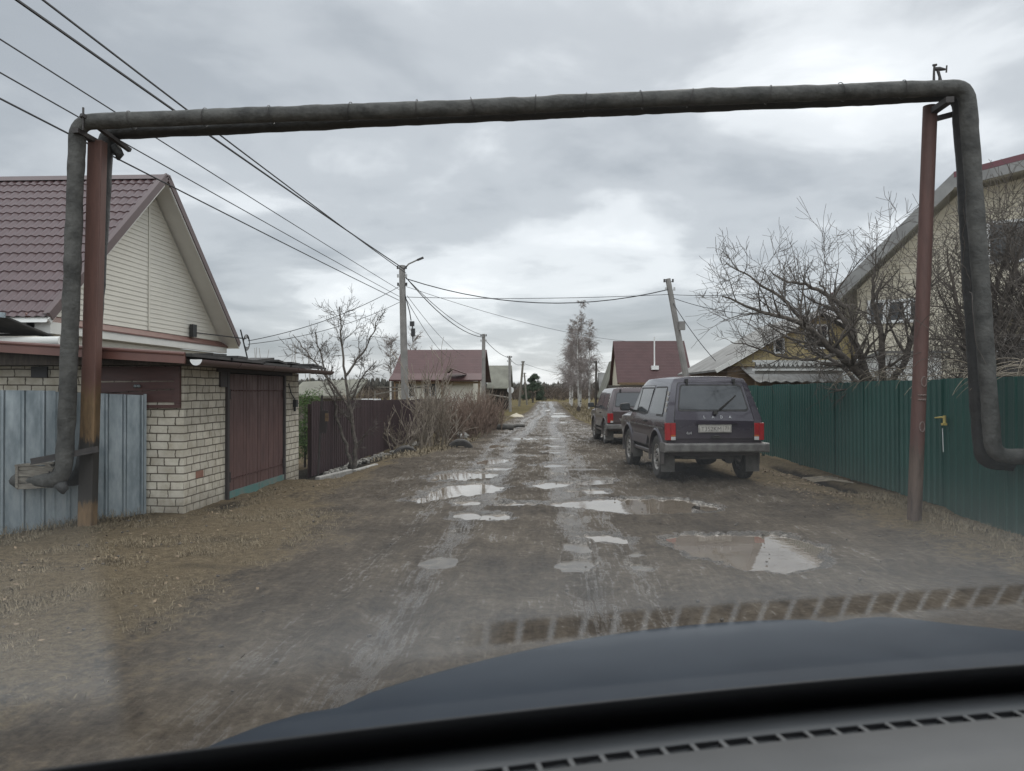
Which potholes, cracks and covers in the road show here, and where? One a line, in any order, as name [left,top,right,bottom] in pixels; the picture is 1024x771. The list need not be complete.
pothole [556,539,600,553]
pothole [448,497,485,506]
pothole [399,481,508,503]
pothole [546,495,704,515]
pothole [659,531,833,574]
pothole [694,503,725,512]
pothole [546,555,606,573]
pothole [570,532,641,544]
pothole [530,480,578,489]
pothole [426,470,503,482]
pothole [412,554,468,569]
pothole [449,511,513,521]
